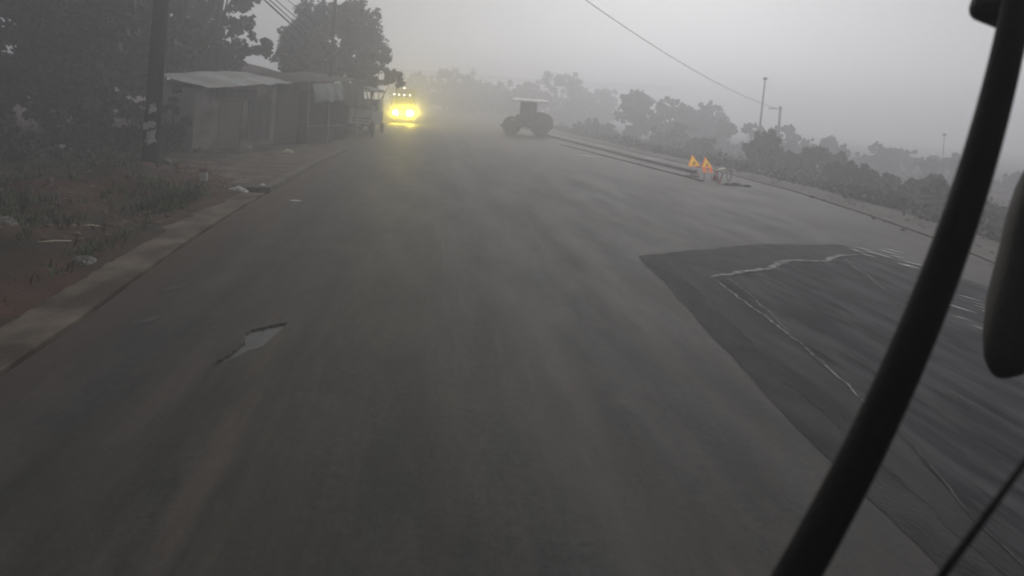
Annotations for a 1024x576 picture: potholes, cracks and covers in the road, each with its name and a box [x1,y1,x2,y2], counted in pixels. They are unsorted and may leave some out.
crack [711,254,1024,566]
pothole [209,322,288,368]
